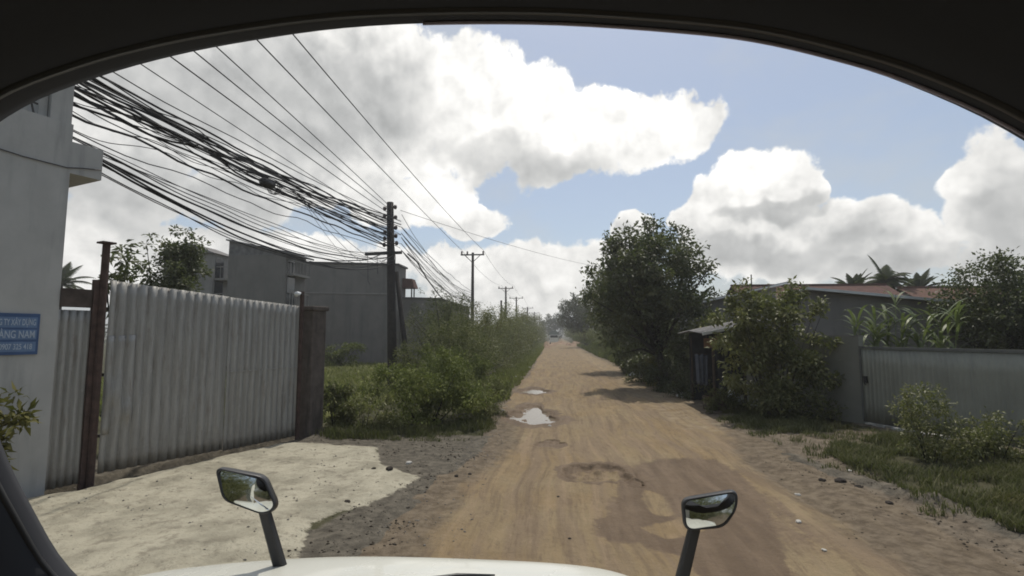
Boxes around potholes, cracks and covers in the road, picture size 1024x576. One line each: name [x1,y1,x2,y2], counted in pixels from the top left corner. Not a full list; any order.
pothole [557,461,637,485]
pothole [531,438,573,450]
pothole [622,477,647,488]
pothole [500,404,564,426]
pothole [512,387,555,395]
